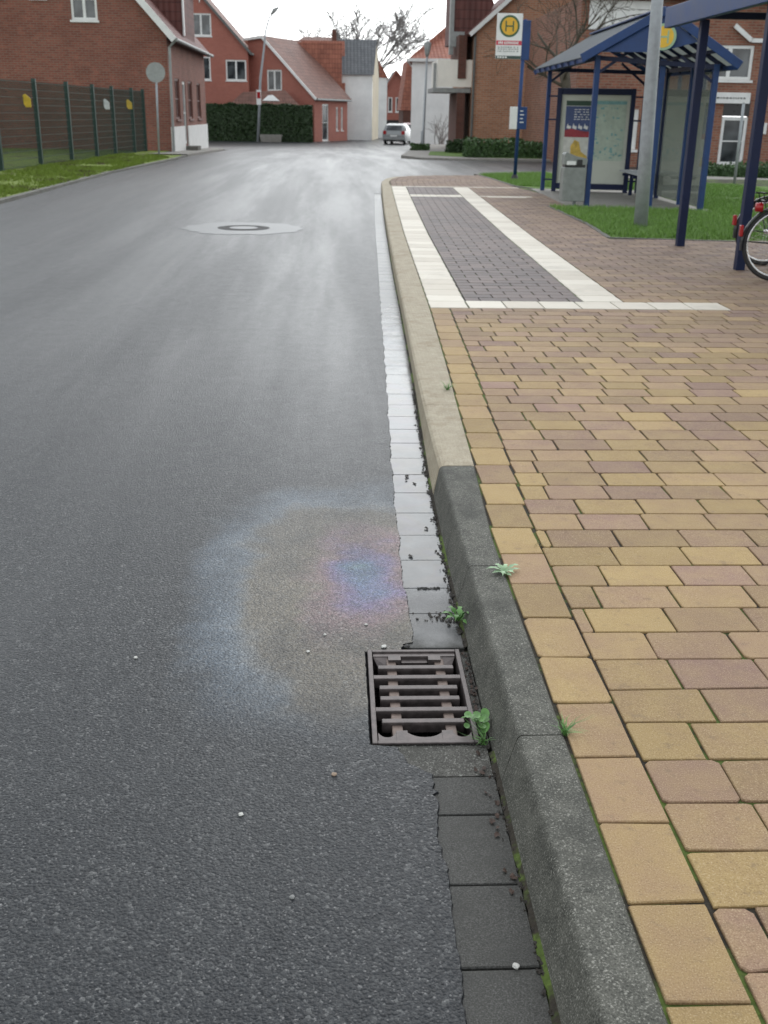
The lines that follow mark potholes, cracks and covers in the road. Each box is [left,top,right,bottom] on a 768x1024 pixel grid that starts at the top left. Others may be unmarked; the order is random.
drain grate [367,649,480,745]
manhole cover [180,222,303,235]
